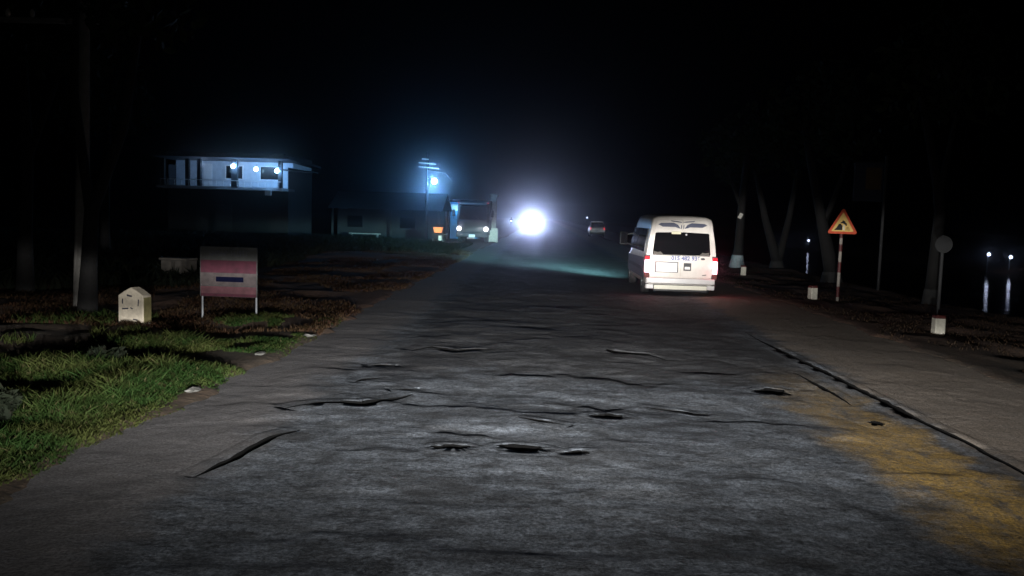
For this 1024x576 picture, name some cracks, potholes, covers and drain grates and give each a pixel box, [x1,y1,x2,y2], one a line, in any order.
pothole [418,441,485,454]
pothole [483,441,565,456]
crack [174,345,510,480]
pothole [744,386,800,398]
crack [599,347,678,360]
crack [634,332,1024,484]
pothole [552,447,605,459]
pothole [580,411,637,421]
